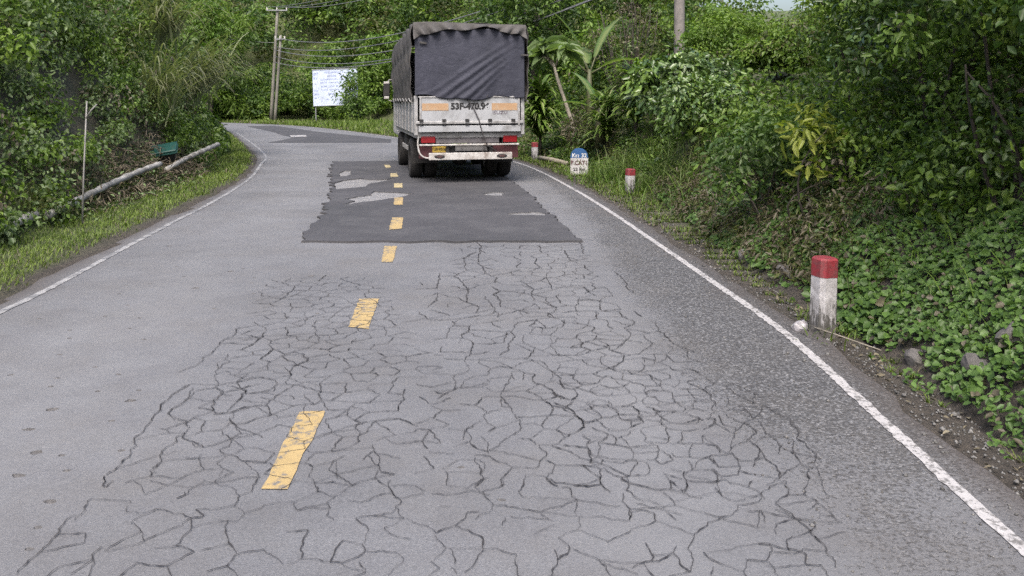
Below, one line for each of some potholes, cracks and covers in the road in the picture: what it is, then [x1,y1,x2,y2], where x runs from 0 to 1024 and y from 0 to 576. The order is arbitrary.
crack [402,242,845,576]
crack [17,275,554,576]
